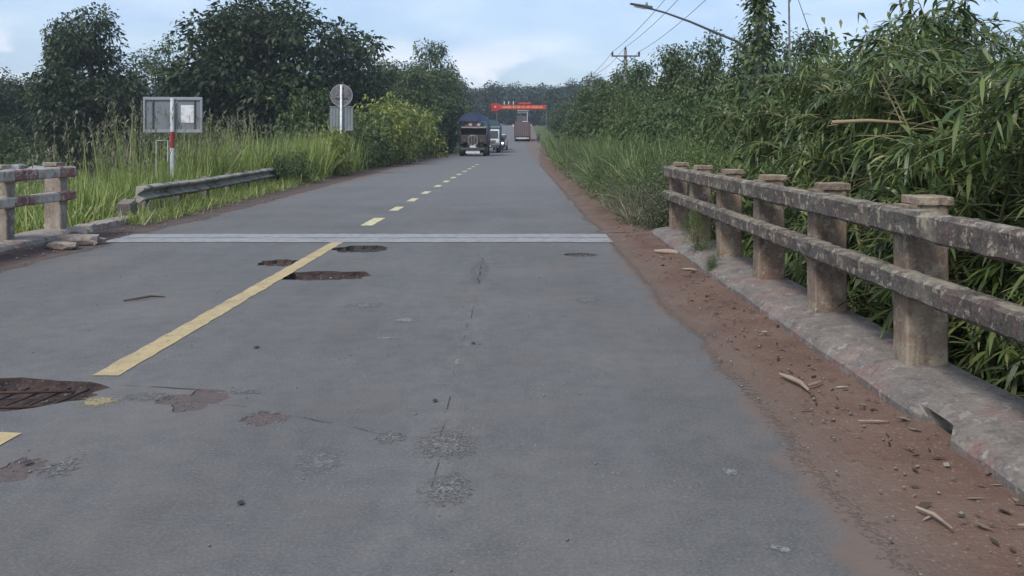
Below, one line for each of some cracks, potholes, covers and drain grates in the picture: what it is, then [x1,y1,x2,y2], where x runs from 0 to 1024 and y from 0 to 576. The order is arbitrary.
pothole [0,457,50,483]
pothole [331,245,388,253]
pothole [282,271,372,281]
crack [130,385,380,434]
pothole [257,259,298,267]
